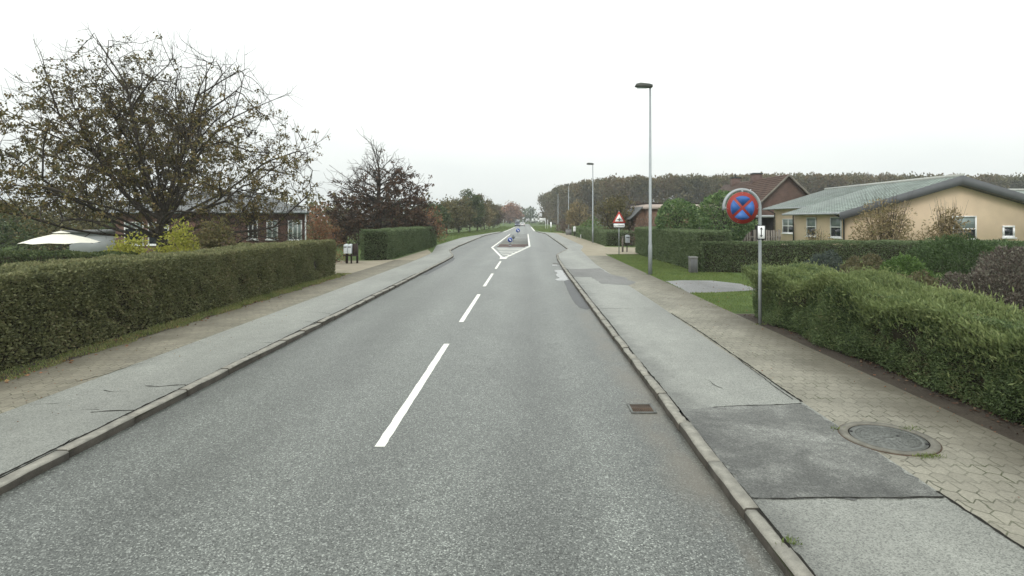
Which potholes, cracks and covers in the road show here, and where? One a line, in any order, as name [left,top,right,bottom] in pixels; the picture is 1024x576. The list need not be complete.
drain grate [627,403,657,413]
manhole cover [838,422,942,457]
crack [671,313,803,407]
